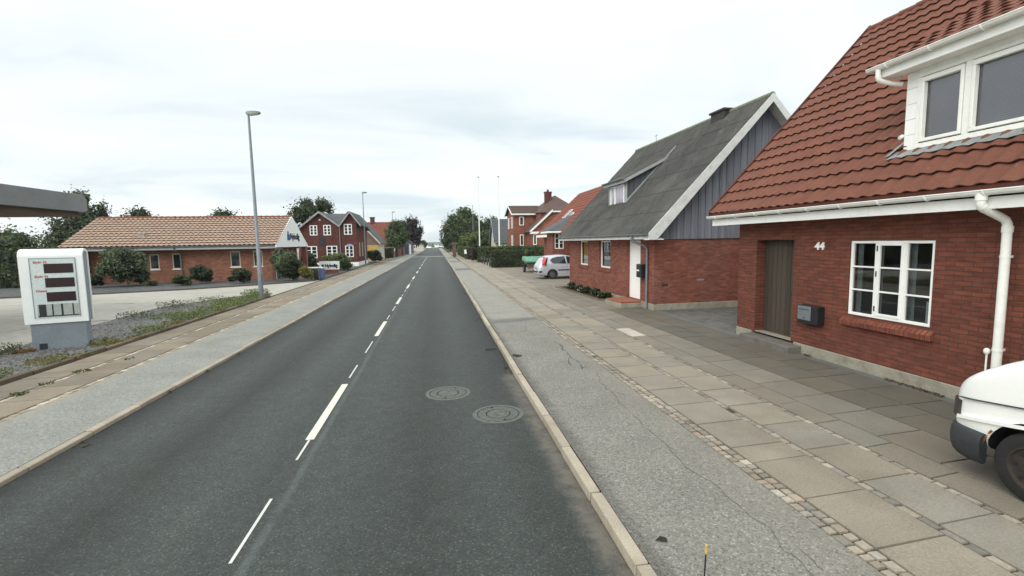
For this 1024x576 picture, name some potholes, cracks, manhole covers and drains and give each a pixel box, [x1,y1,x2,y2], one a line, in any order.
manhole cover [425,386,471,401]
manhole cover [473,405,524,424]
